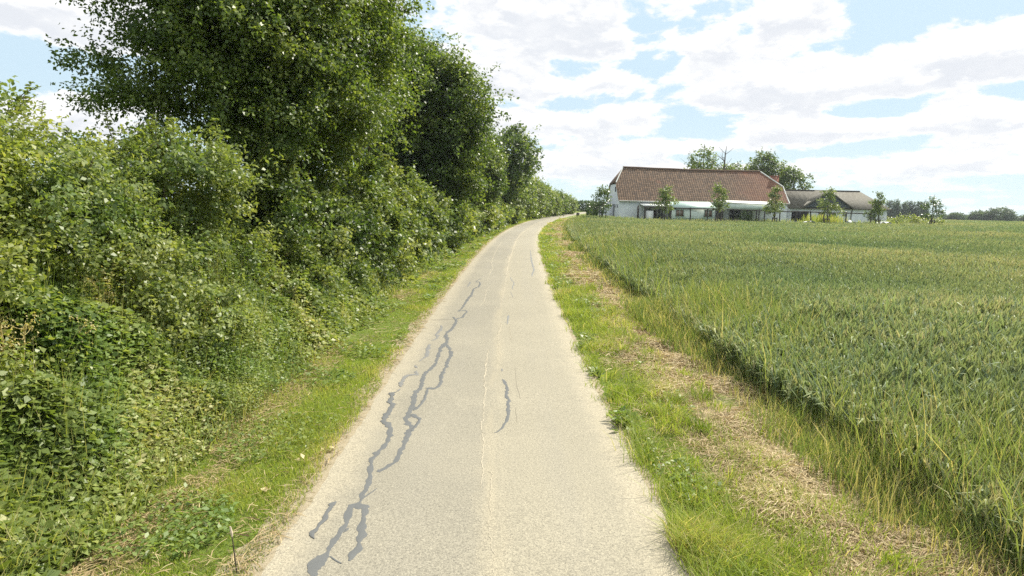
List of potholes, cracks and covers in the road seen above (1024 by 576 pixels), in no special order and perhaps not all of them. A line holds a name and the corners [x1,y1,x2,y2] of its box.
crack [480,324,512,573]
